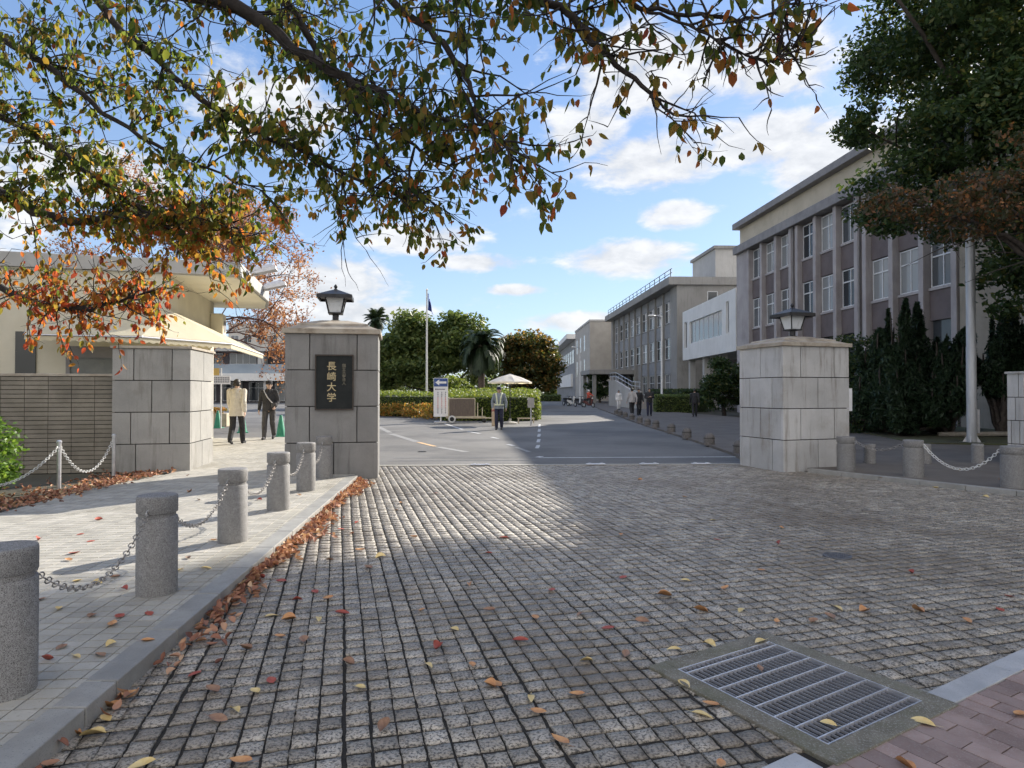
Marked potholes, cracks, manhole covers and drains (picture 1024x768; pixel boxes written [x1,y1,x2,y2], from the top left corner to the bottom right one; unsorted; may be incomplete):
manhole cover [822,552,852,560]
drain grate [648,632,959,766]
